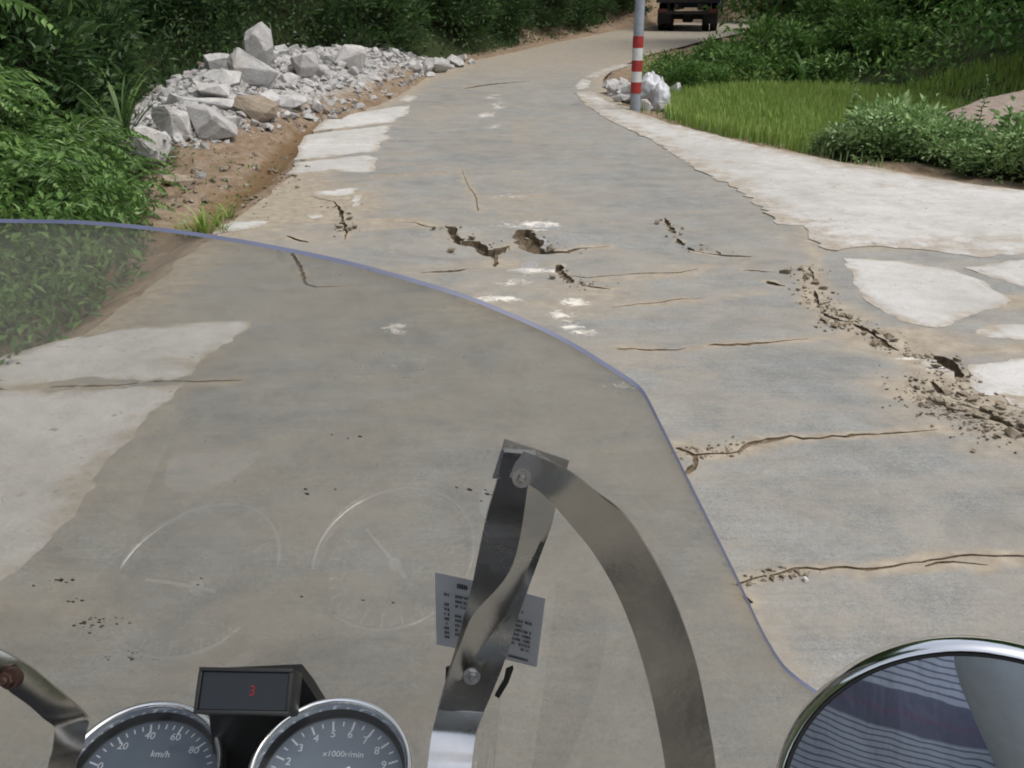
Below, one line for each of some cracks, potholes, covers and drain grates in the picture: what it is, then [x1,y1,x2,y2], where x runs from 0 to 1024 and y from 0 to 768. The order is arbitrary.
crack [555,218,766,289]
crack [408,170,510,273]
crack [287,236,349,288]
crack [311,196,348,239]
pothole [512,230,607,254]
